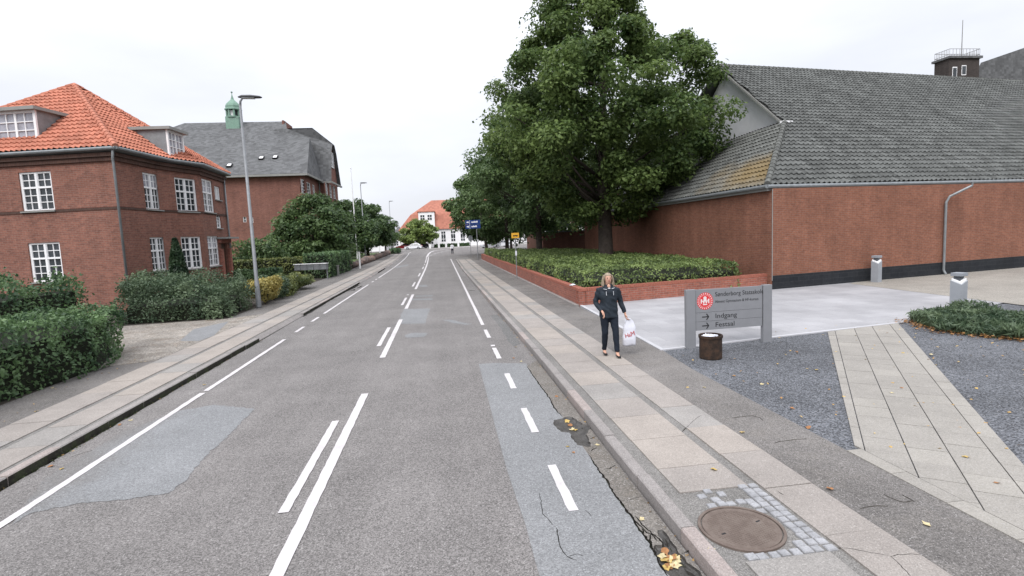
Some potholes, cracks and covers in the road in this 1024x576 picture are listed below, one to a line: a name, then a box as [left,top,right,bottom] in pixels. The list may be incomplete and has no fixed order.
manhole cover [698,506,787,553]
crack [586,437,689,576]
pothole [652,530,702,576]
pothole [553,416,591,447]
crack [539,494,582,560]
crack [860,494,915,509]
